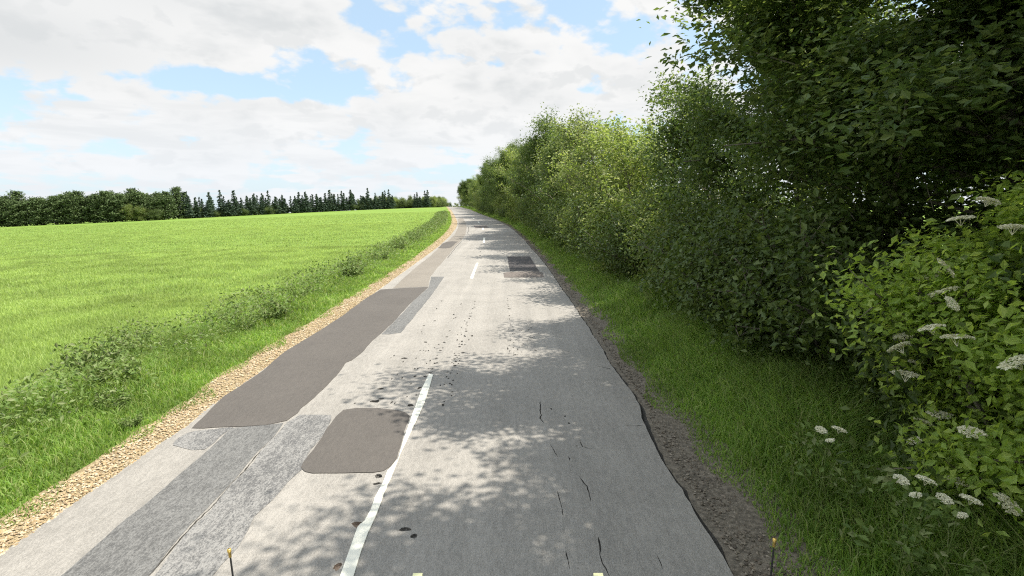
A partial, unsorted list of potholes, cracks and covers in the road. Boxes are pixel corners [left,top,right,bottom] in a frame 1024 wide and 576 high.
crack [507,225,734,576]
